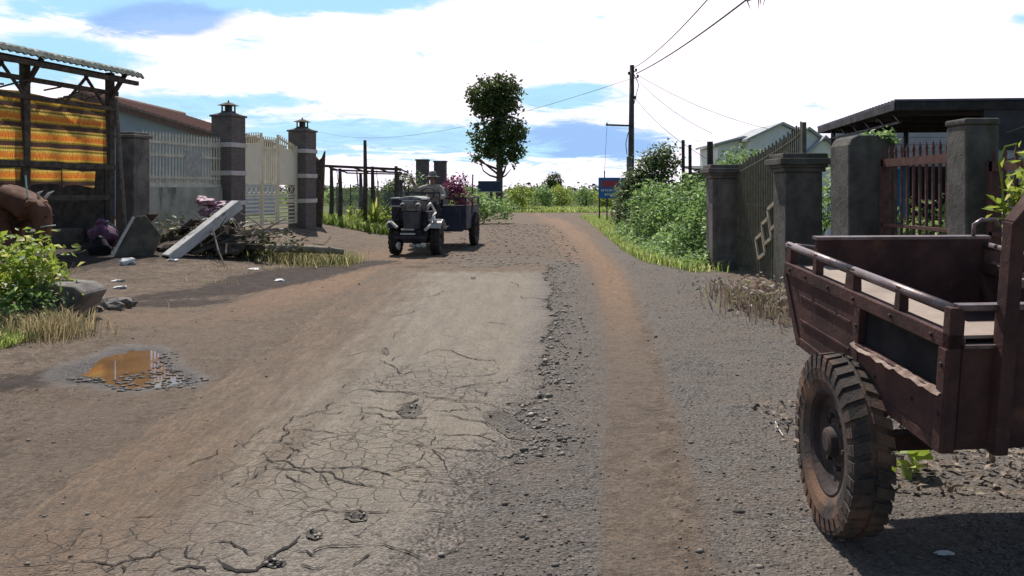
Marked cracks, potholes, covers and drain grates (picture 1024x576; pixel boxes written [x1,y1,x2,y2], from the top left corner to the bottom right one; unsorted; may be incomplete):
pothole [344,511,367,523]
crack [66,532,423,573]
pothole [396,403,423,417]
pothole [66,350,209,392]
pothole [483,411,536,441]
crack [186,335,540,487]
pothole [306,527,323,541]
pothole [263,556,287,568]
